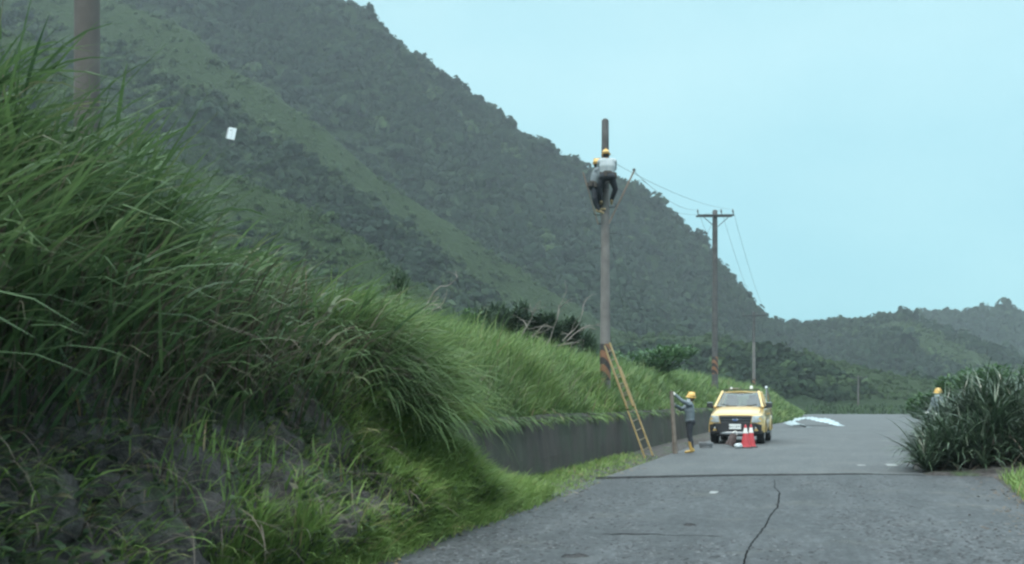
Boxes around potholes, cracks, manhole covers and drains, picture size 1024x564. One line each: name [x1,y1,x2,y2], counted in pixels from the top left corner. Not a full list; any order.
crack [596,473,874,564]
